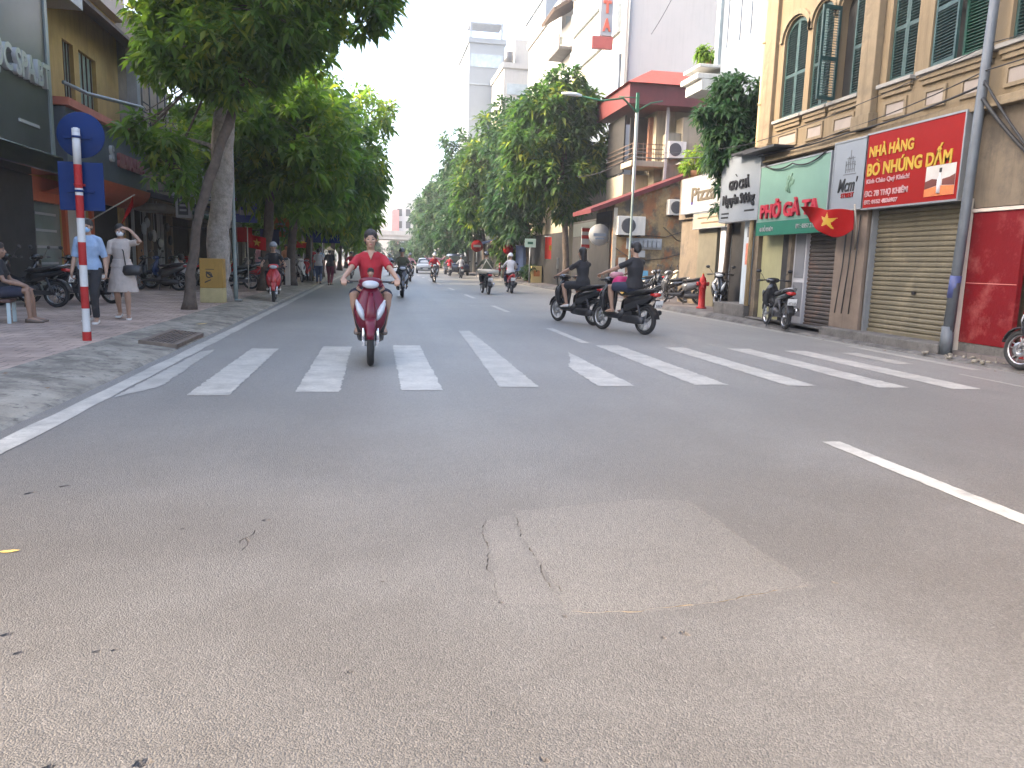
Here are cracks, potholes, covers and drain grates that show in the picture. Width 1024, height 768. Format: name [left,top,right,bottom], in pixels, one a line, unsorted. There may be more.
crack [514,504,808,613]
drain grate [138,329,204,349]
crack [482,521,499,598]
